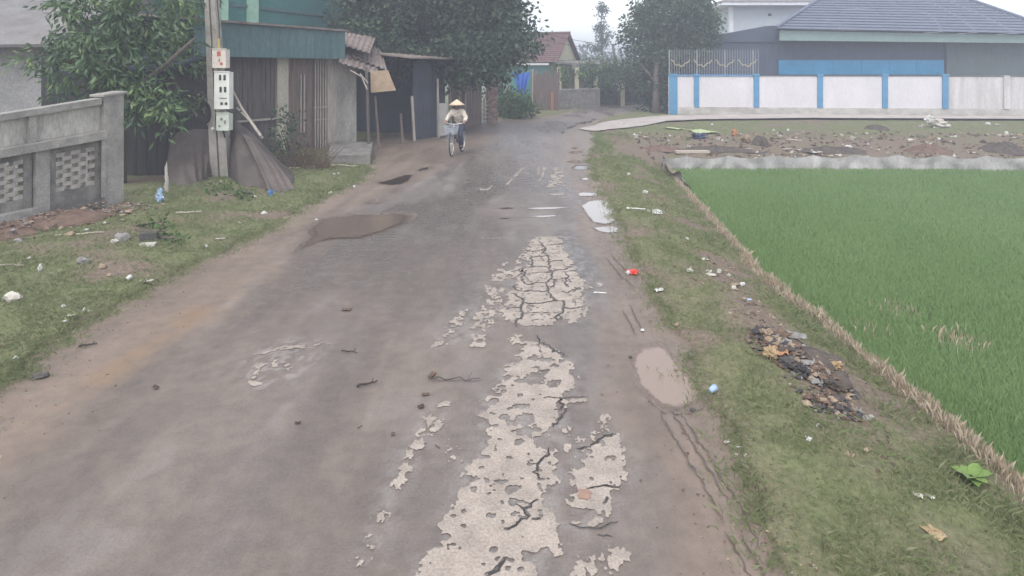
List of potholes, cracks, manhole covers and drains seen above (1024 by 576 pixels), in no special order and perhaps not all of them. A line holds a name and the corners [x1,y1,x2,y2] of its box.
crack [507,242,583,357]
crack [572,521,618,536]
crack [532,447,551,479]
pothole [375,174,414,185]
pothole [627,341,708,414]
crack [547,396,615,449]
crack [506,499,539,529]
pothole [580,200,617,225]
crack [488,558,506,574]
pothole [291,212,418,253]
